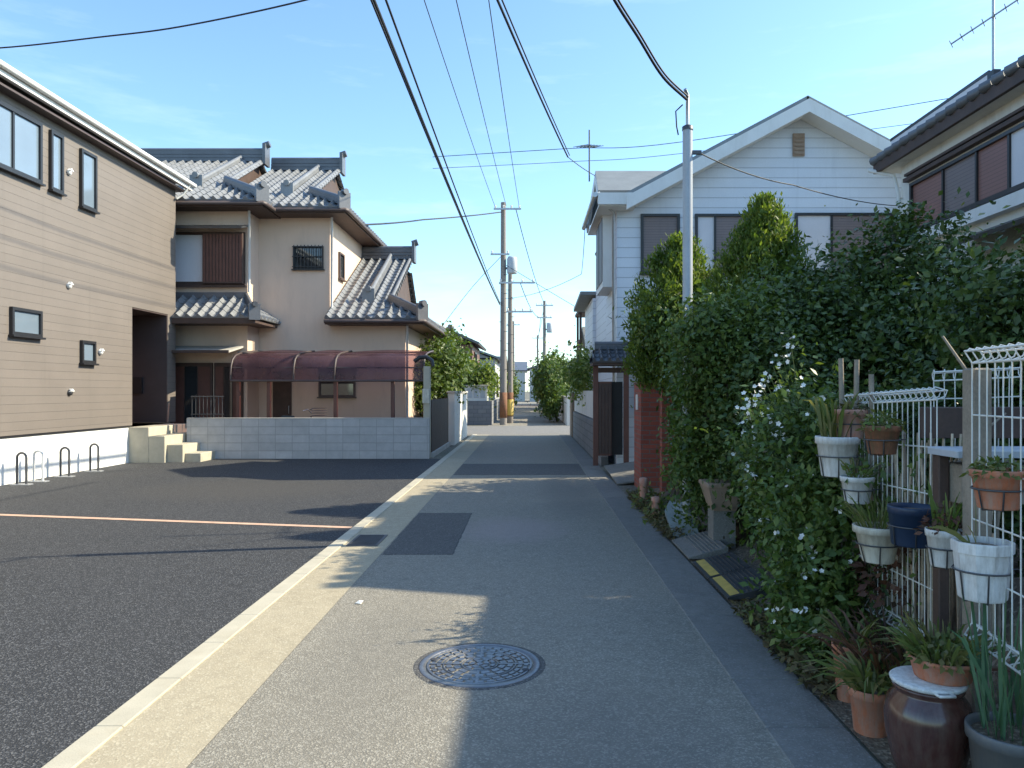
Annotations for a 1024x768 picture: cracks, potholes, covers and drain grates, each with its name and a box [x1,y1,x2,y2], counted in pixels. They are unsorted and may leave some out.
manhole cover [413,643,546,690]
